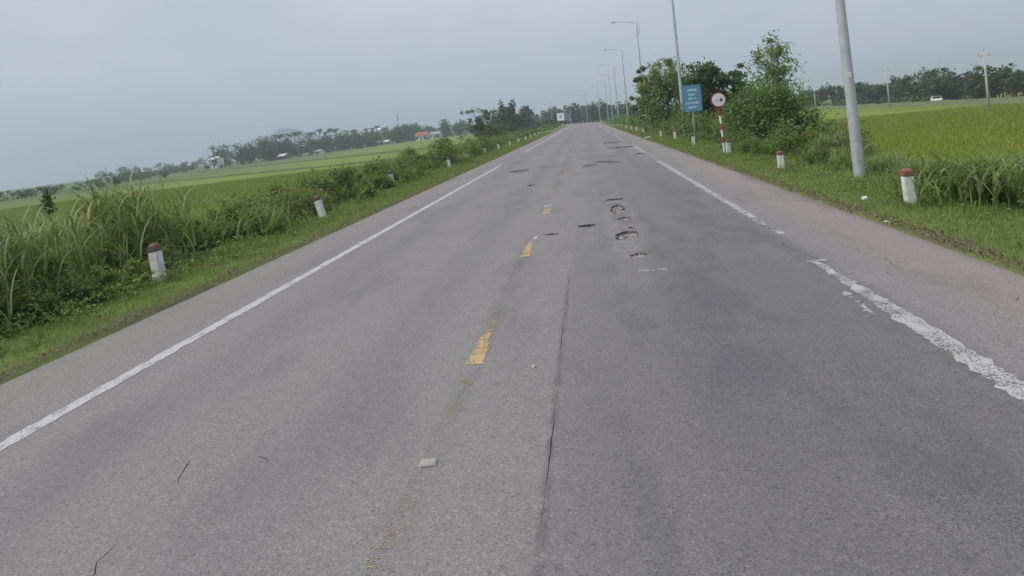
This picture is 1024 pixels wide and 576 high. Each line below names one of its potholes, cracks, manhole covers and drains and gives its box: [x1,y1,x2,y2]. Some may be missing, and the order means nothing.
pothole [615,231,639,240]
crack [541,280,569,522]
